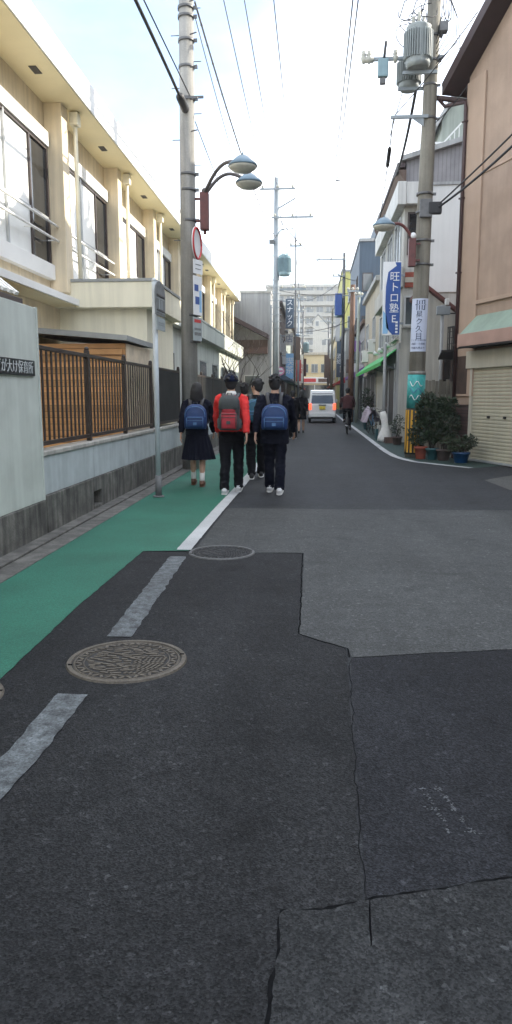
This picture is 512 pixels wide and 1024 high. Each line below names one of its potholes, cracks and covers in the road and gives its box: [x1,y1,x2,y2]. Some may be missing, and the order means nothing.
manhole cover [66,640,187,684]
manhole cover [189,545,255,560]
crack [349,649,512,945]
